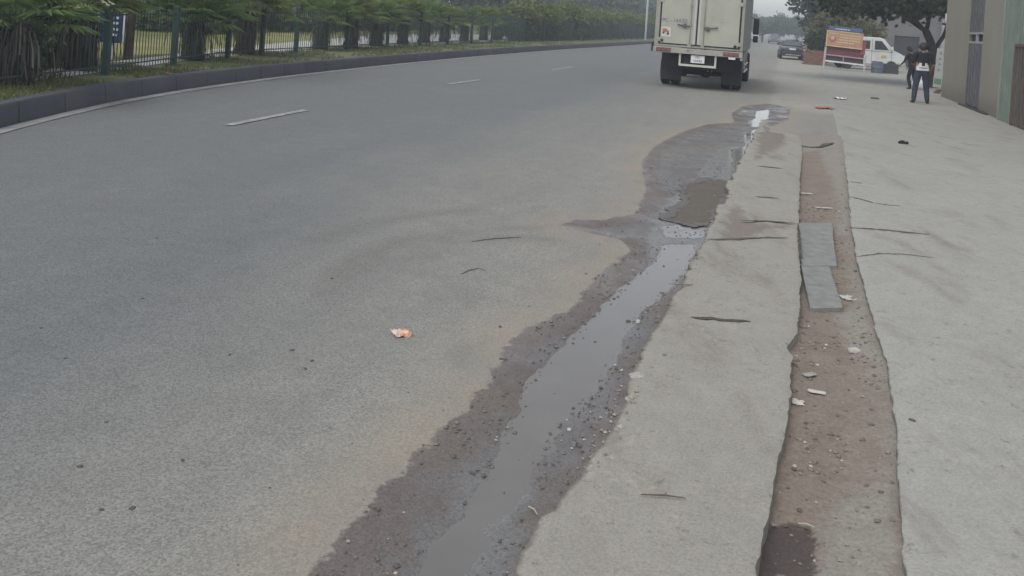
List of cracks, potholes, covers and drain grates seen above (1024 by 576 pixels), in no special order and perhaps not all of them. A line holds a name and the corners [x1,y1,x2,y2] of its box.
crack [714,220,802,261]
